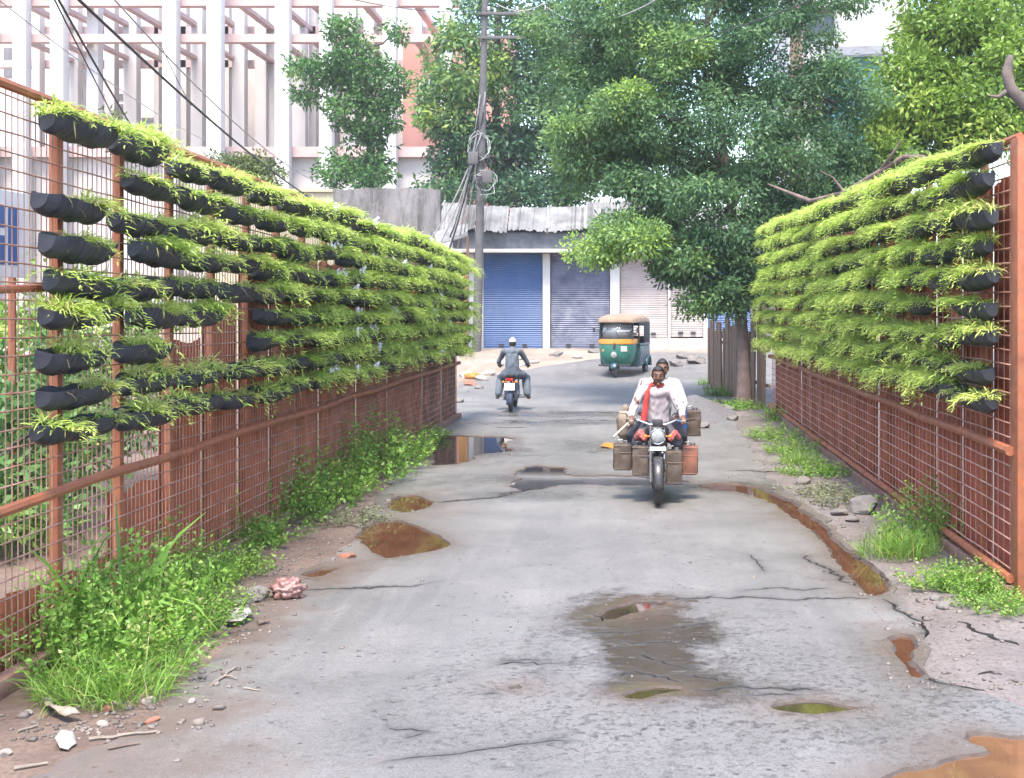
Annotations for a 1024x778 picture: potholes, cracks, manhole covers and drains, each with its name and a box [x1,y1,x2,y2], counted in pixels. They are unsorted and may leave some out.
crack [883,599,930,636]
pothole [771,700,858,714]
pothole [355,520,451,558]
pothole [431,435,516,465]
pothole [887,633,926,677]
pothole [699,482,892,596]
pothole [509,466,690,491]
pothole [597,600,667,620]
pothole [881,731,1024,778]
pothole [623,686,692,699]
crack [675,556,864,600]
crack [398,740,561,760]
